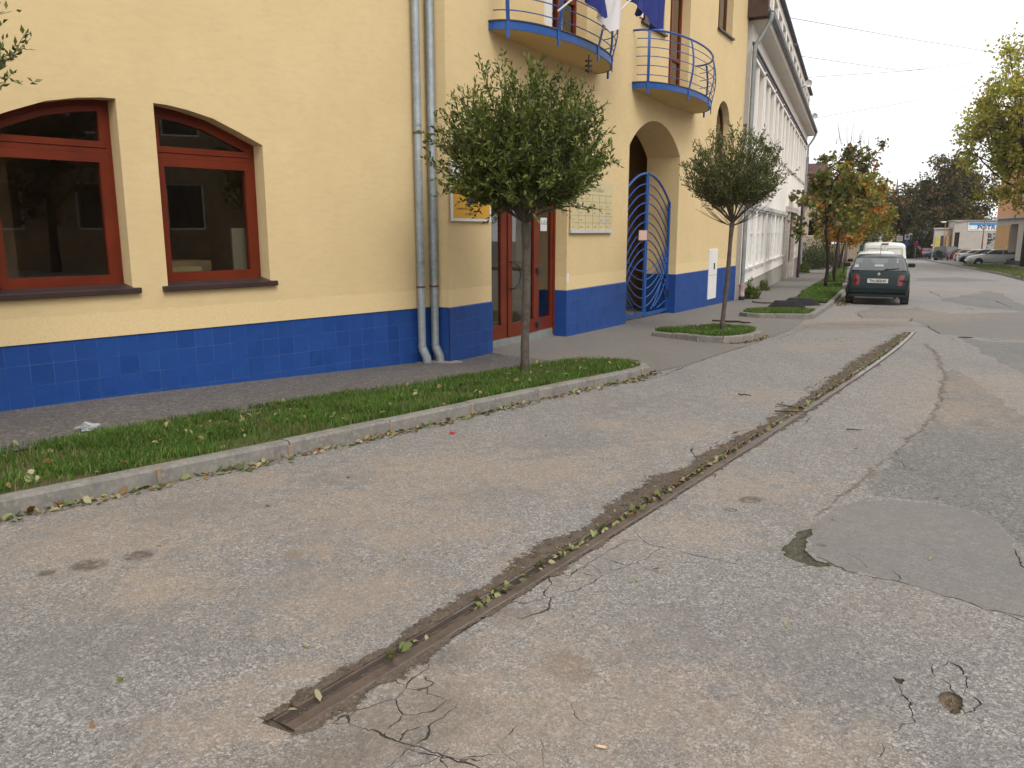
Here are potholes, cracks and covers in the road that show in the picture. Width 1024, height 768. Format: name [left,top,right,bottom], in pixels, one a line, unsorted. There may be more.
crack [510,533,753,619]
pothole [938,691,965,715]
crack [878,660,983,758]
crack [331,663,523,768]
